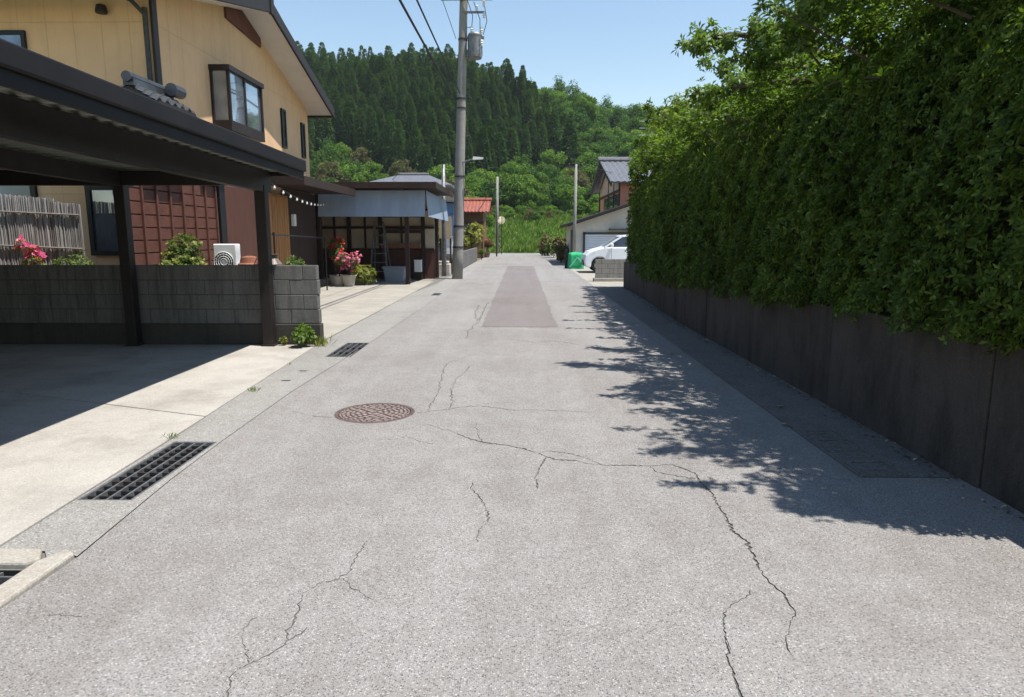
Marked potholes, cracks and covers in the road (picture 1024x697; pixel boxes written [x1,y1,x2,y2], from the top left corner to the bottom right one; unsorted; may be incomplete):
crack [418,355,574,413]
drain grate [325,343,369,357]
drain grate [0,570,22,585]
drain grate [77,442,217,500]
crack [431,425,796,697]
crack [226,543,373,697]
manhole cover [334,403,415,423]
